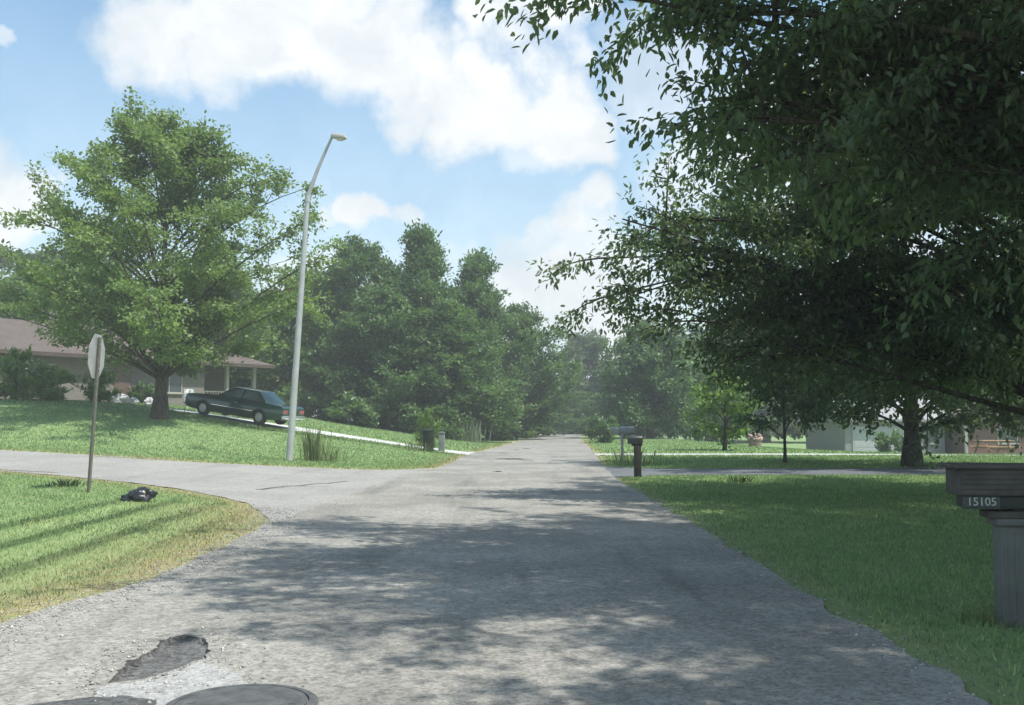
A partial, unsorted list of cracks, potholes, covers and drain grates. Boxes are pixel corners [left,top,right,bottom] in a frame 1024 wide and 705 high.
manhole cover [166,684,319,705]
pothole [108,634,211,683]
